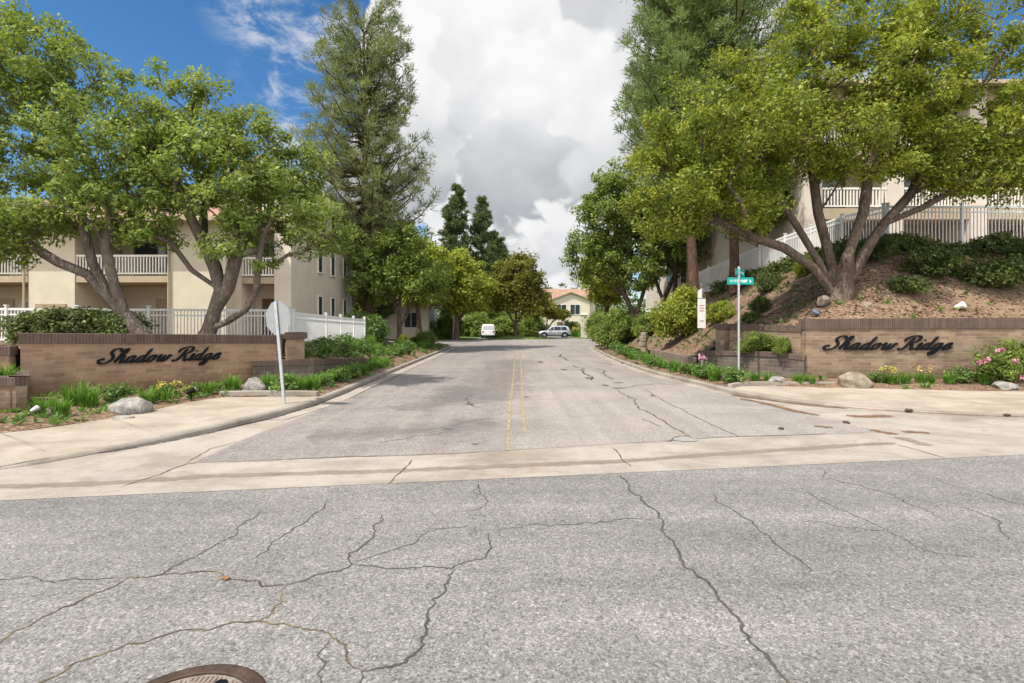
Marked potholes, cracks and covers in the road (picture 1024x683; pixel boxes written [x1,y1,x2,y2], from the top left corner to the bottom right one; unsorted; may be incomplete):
crack [803,468,975,558]
crack [506,475,812,683]
crack [0,484,492,683]
crack [559,354,739,442]
crack [938,479,1022,540]
manhole cover [146,664,267,683]
